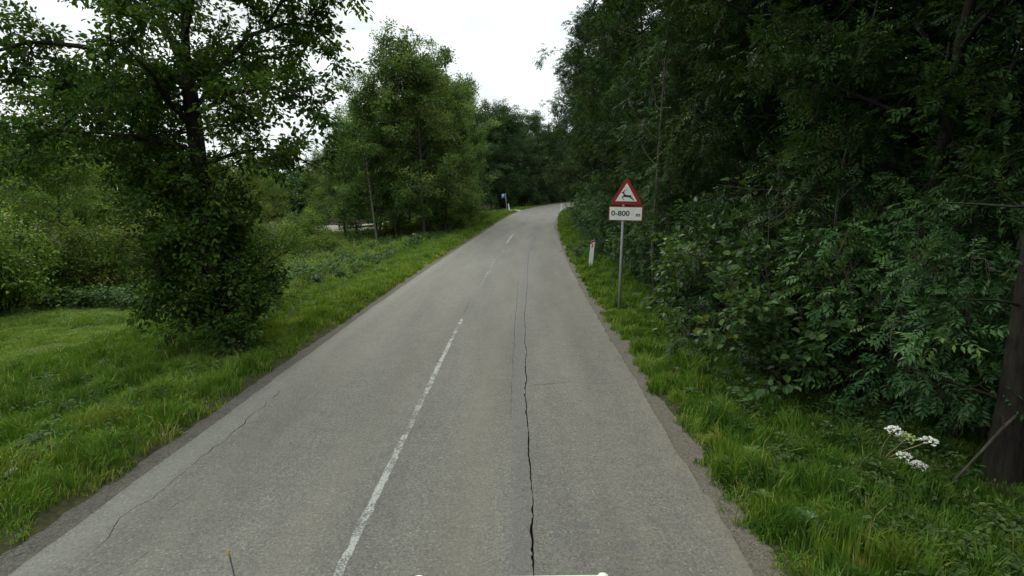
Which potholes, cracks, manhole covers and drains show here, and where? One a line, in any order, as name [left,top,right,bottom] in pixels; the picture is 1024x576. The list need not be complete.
crack [89,392,279,559]
crack [524,255,582,576]
